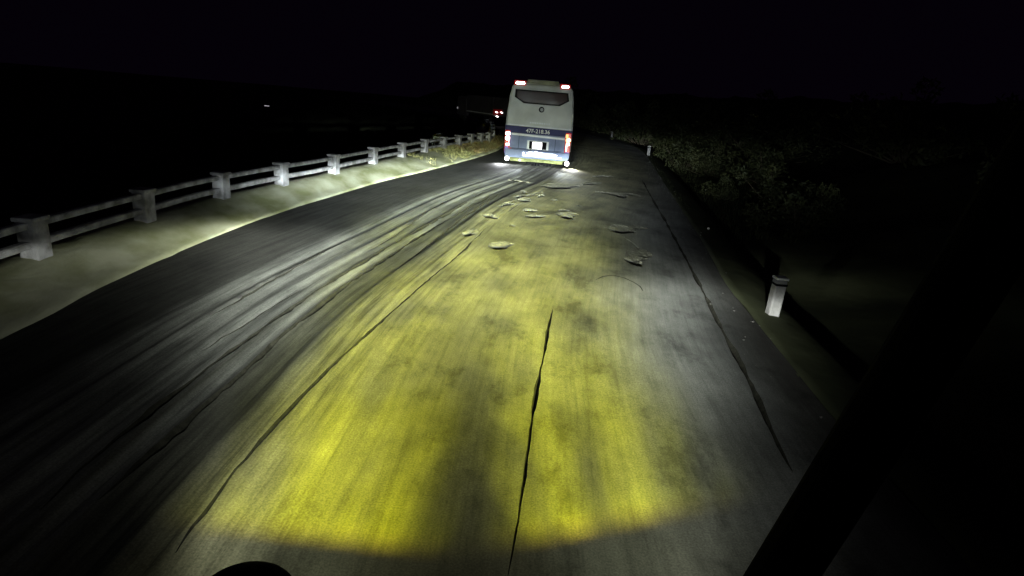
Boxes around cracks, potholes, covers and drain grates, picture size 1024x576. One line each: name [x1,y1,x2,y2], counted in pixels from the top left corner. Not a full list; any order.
pothole [605,224,647,234]
crack [596,178,793,472]
pothole [623,248,653,267]
crack [508,310,553,575]
pothole [488,241,515,250]
crack [40,192,532,553]
